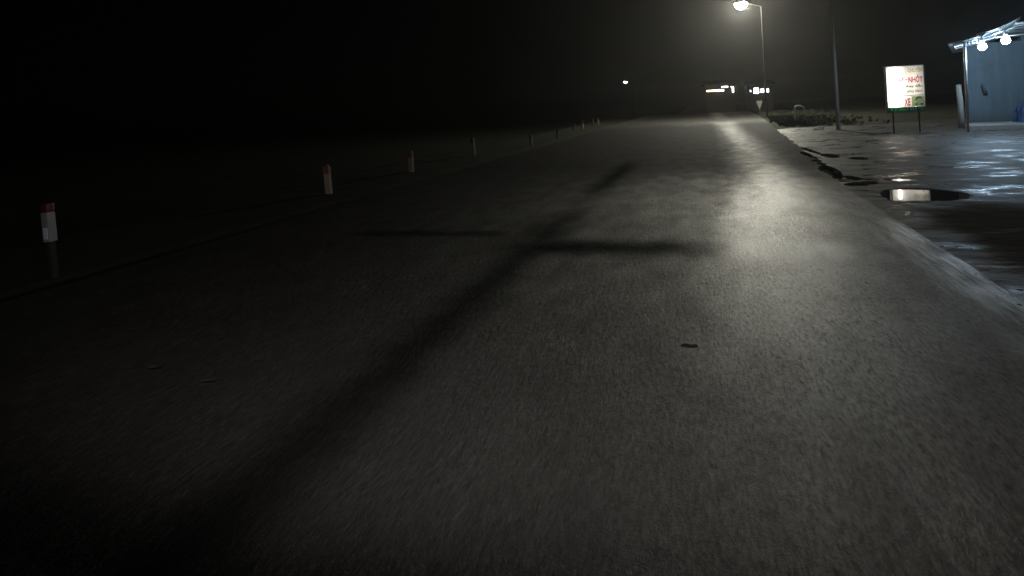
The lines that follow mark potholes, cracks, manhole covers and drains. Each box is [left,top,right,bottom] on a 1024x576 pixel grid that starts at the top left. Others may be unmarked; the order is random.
pothole [879,188,974,202]
pothole [817,164,843,179]
